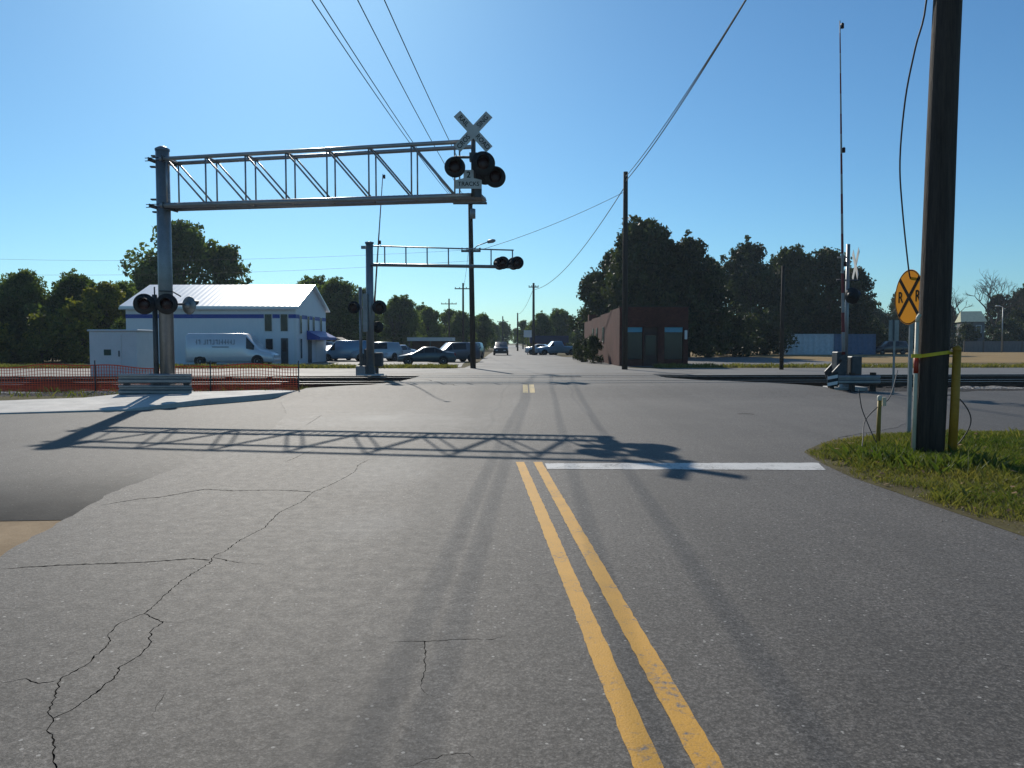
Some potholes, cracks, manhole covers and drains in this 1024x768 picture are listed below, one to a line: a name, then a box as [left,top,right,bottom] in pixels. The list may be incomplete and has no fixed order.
crack [8,461,365,768]
crack [389,636,502,698]
